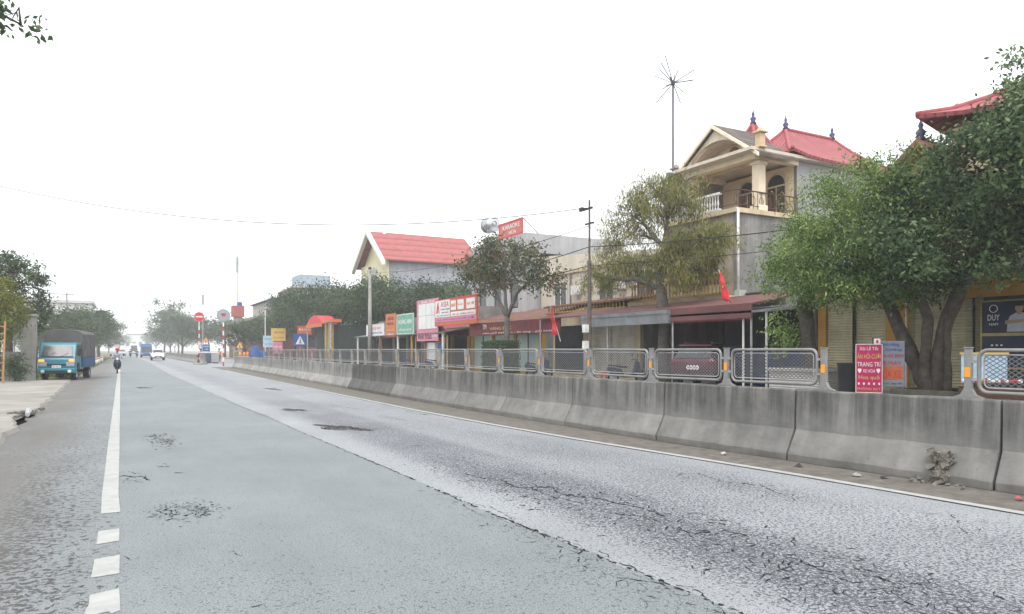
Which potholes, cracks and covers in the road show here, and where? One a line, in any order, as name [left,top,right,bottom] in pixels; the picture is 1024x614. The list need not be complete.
crack [376,454,1022,614]
